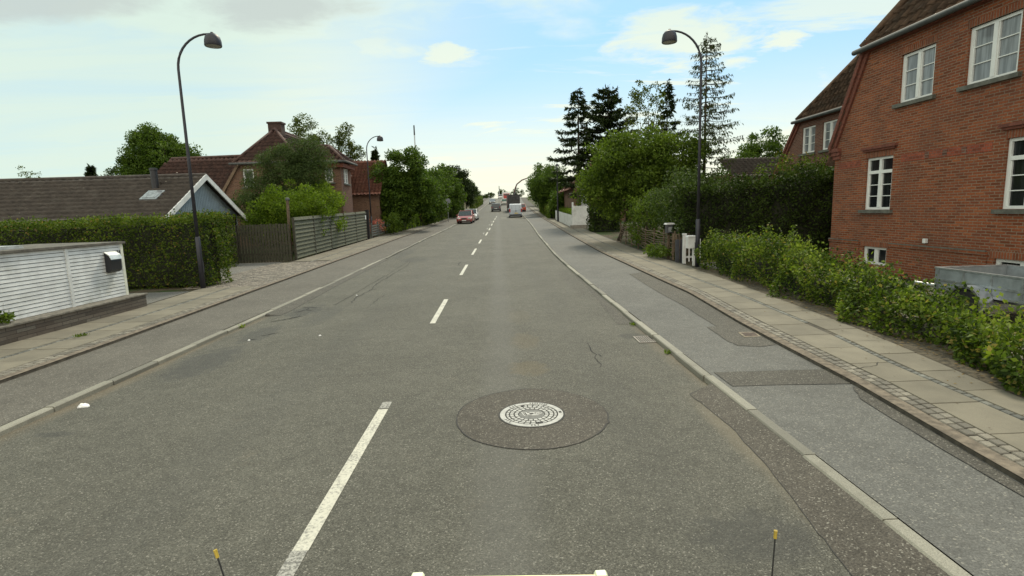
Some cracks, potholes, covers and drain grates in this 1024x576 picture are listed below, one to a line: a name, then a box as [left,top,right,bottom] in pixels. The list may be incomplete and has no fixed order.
crack [337,261,410,305]
manhole cover [498,402,565,428]
